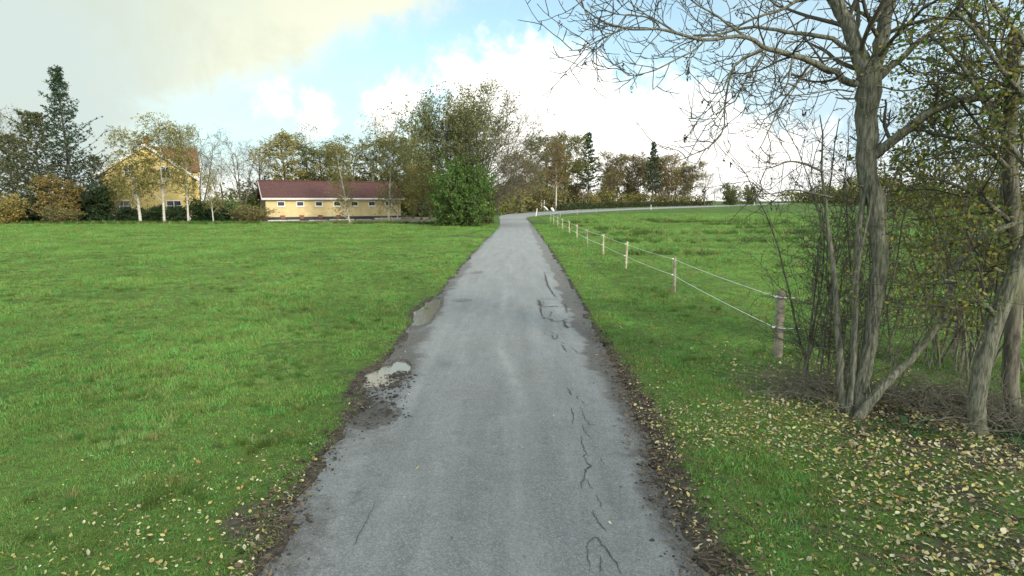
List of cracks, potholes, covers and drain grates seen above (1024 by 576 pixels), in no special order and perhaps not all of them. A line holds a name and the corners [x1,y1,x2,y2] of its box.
pothole [357,357,416,391]
crack [567,389,621,572]
crack [536,272,577,352]
pothole [407,296,444,330]
